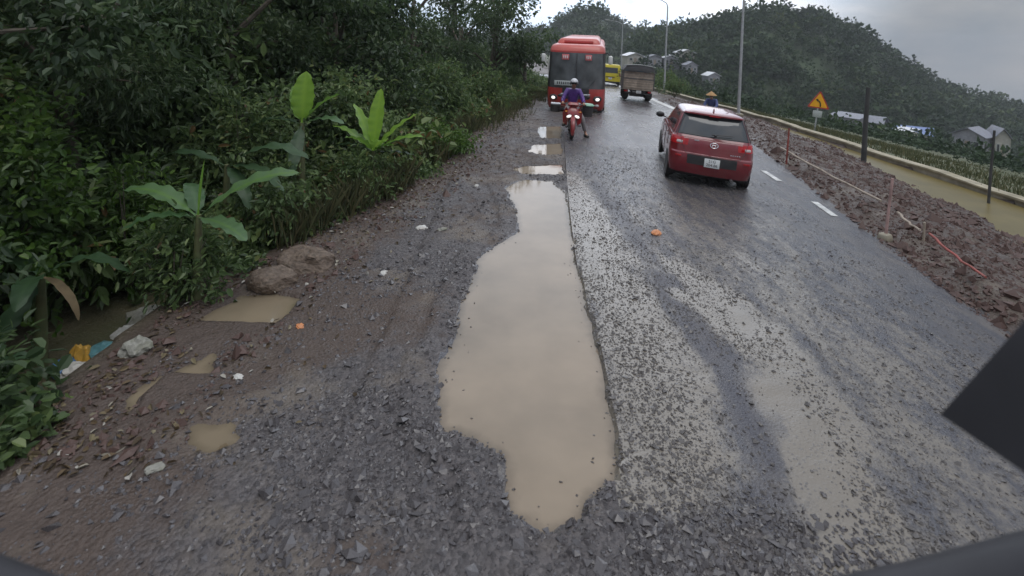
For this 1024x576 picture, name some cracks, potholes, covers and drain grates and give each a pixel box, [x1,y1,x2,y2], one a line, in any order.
pothole [432,179,624,534]
pothole [527,143,565,155]
pothole [537,126,563,139]
pothole [512,164,567,175]
